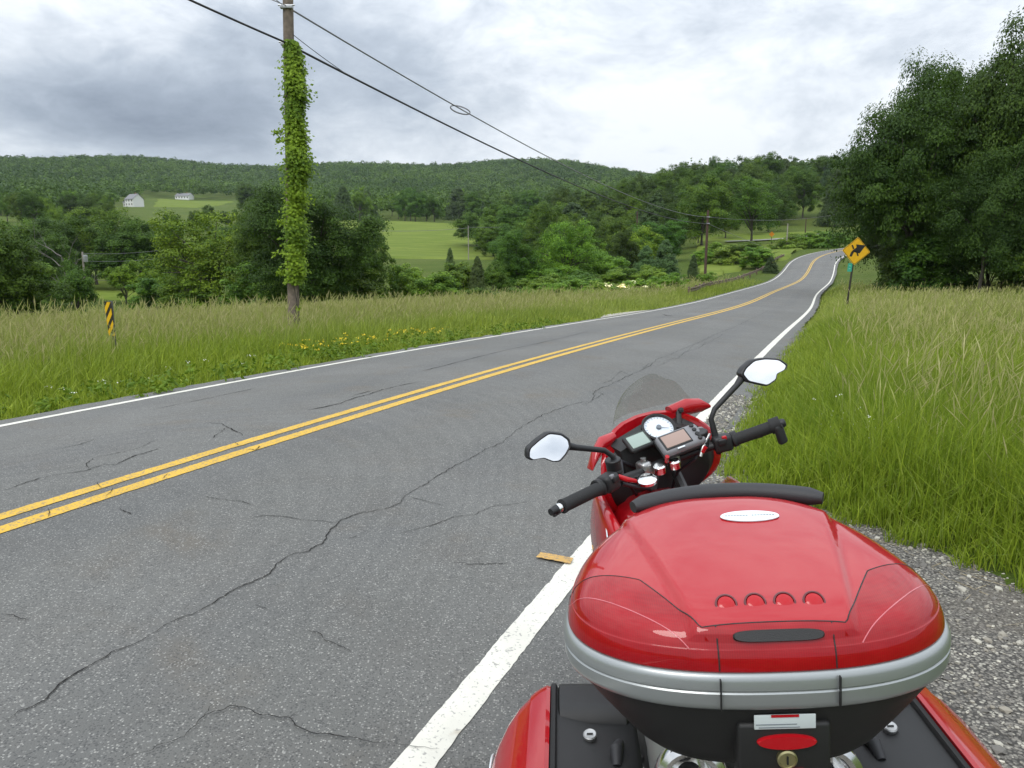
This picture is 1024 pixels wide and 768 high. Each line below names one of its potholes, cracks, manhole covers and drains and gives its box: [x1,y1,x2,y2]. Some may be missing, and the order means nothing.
crack [114,705,439,763]
crack [4,317,754,721]
